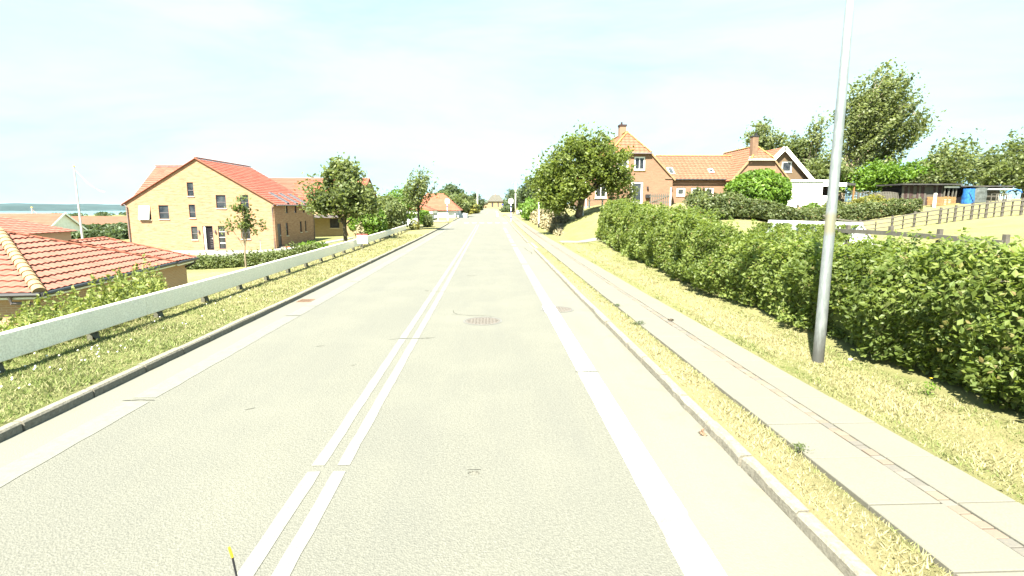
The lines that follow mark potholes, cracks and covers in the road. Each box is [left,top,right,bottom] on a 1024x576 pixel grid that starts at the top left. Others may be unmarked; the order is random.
pothole [466,469,482,477]
manhole cover [463,317,502,325]
